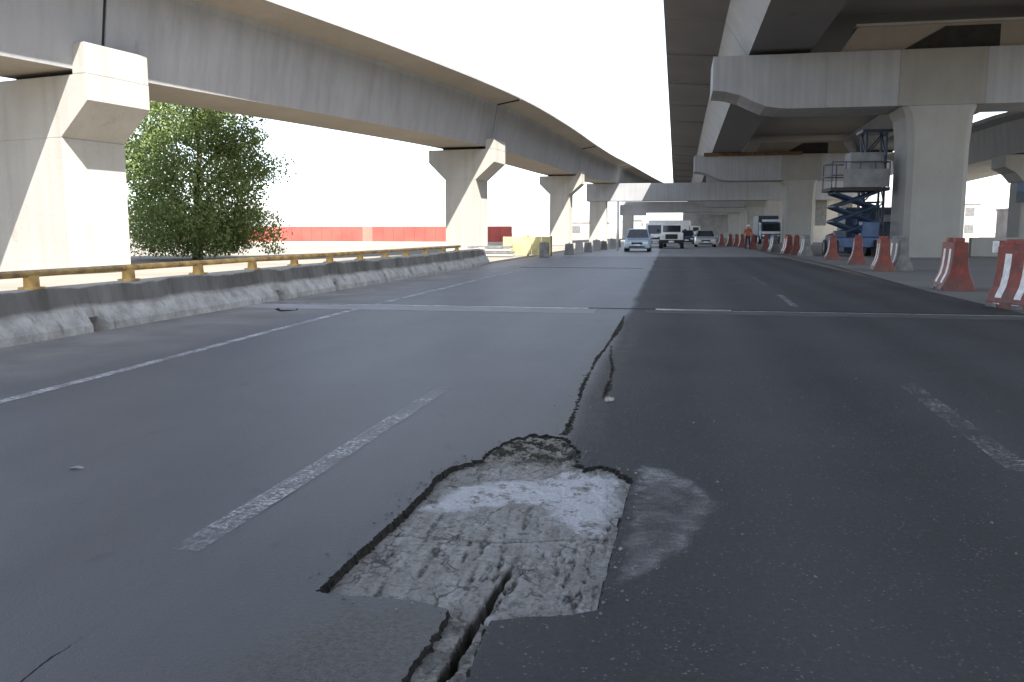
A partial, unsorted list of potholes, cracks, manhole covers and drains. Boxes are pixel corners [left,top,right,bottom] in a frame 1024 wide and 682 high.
pothole [316,433,634,641]
crack [20,636,83,682]
crack [558,315,625,435]
